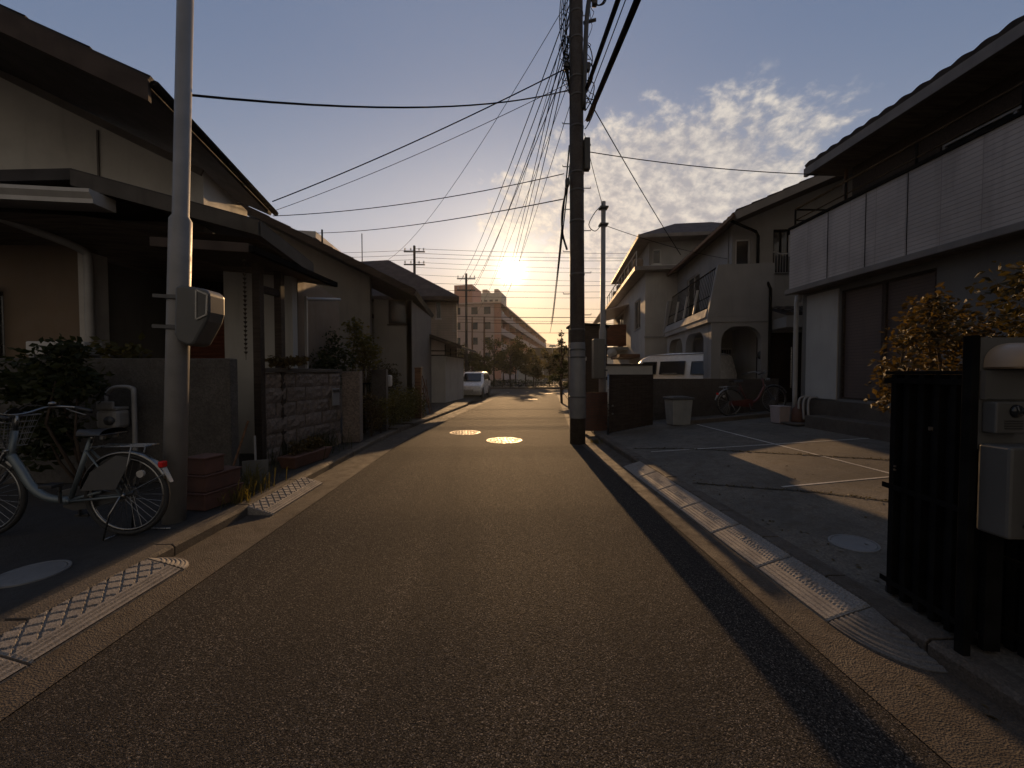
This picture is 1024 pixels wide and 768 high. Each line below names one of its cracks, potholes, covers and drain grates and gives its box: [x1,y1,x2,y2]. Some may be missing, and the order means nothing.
manhole cover [0,560,72,589]
manhole cover [828,534,881,553]
